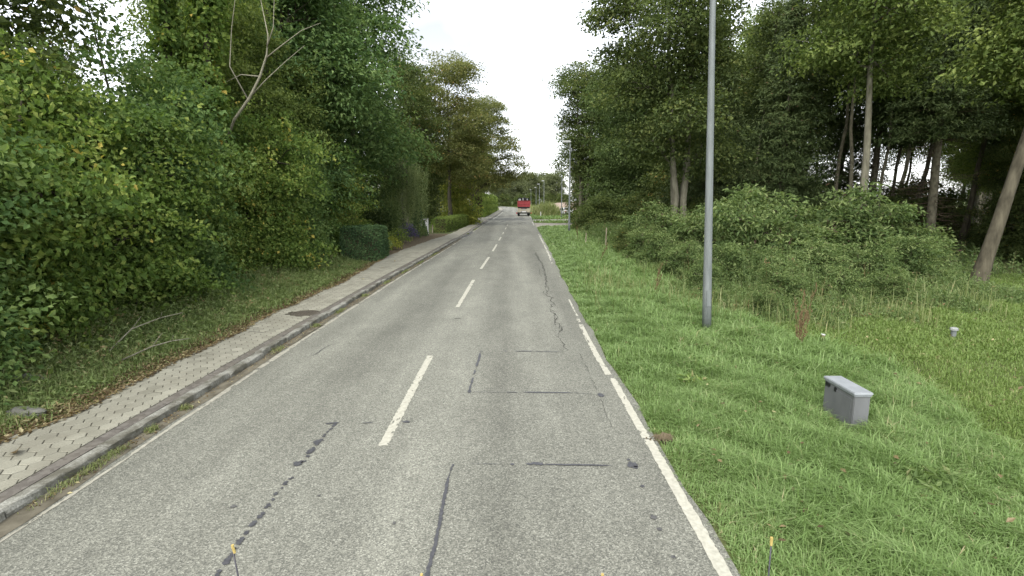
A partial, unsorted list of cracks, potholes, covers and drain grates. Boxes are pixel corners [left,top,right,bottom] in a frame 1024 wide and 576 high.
crack [535,253,612,426]
